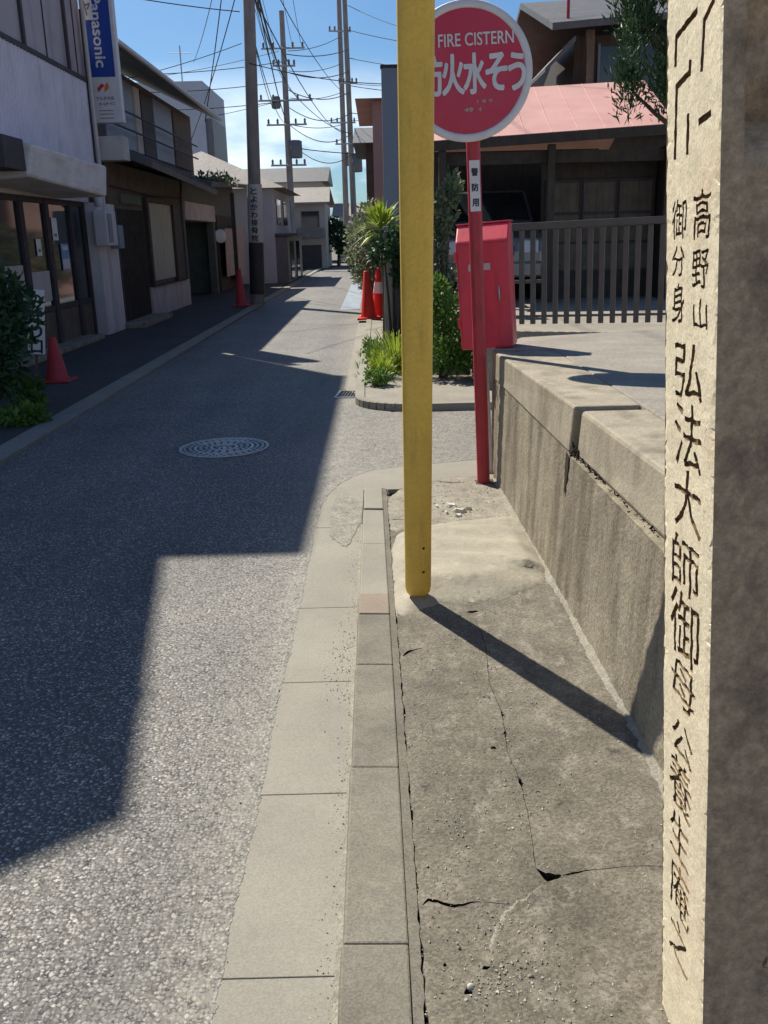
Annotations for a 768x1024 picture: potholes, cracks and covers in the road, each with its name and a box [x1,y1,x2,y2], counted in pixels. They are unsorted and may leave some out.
crack [423,898,502,908]
crack [475,621,631,882]
drain grate [334,390,356,398]
manhole cover [179,437,269,458]
